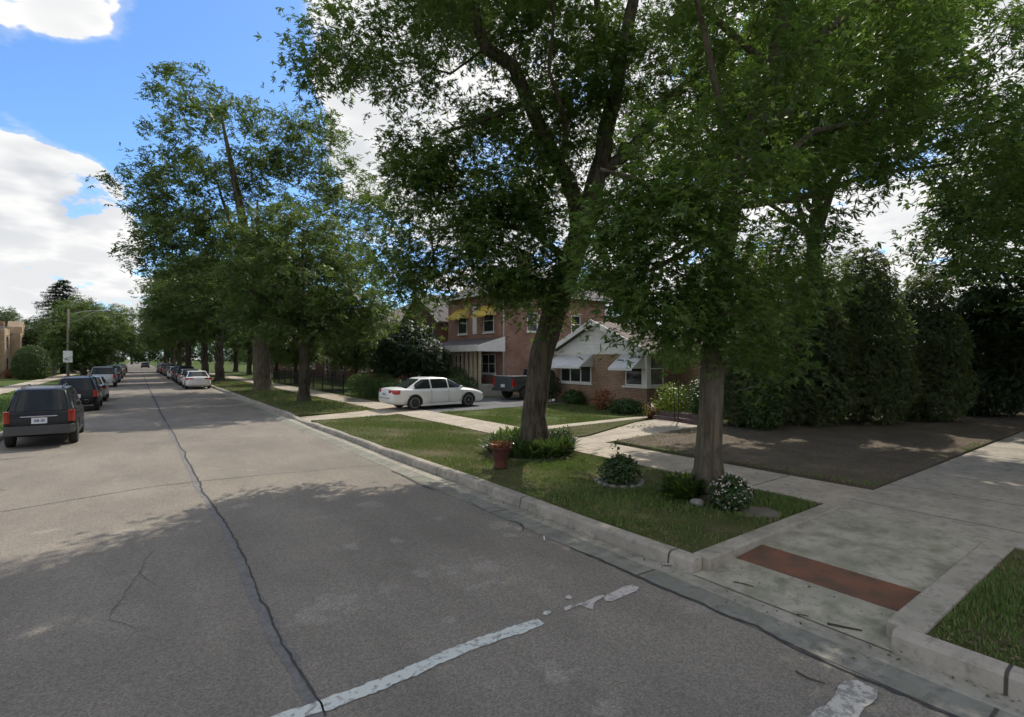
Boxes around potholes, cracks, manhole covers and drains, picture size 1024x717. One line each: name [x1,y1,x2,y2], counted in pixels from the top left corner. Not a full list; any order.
crack [107,553,155,634]
